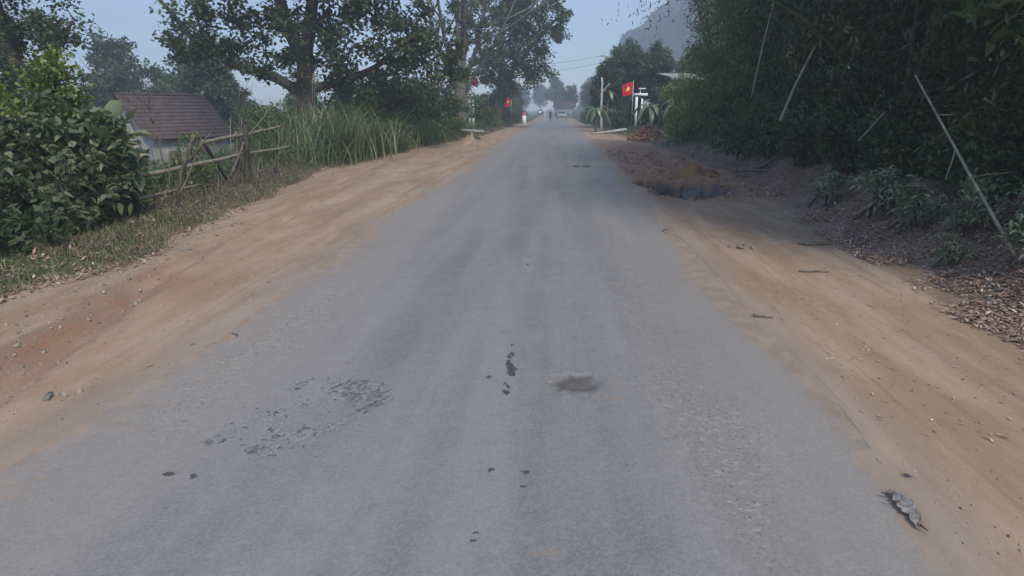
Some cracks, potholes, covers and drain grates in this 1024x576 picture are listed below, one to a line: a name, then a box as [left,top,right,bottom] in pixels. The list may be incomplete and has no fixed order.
pothole [545,371,608,399]
pothole [630,177,749,200]
crack [205,377,393,456]
